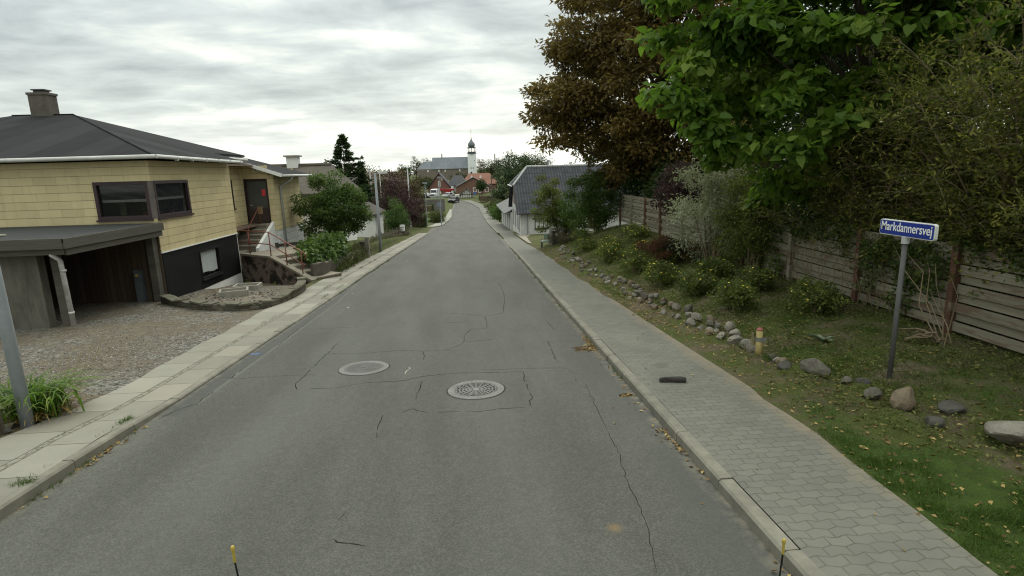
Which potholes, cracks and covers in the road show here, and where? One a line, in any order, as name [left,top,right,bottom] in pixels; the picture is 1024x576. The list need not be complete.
manhole cover [446,380,506,400]
crack [586,385,657,571]
manhole cover [338,361,390,376]
crack [225,284,533,439]
